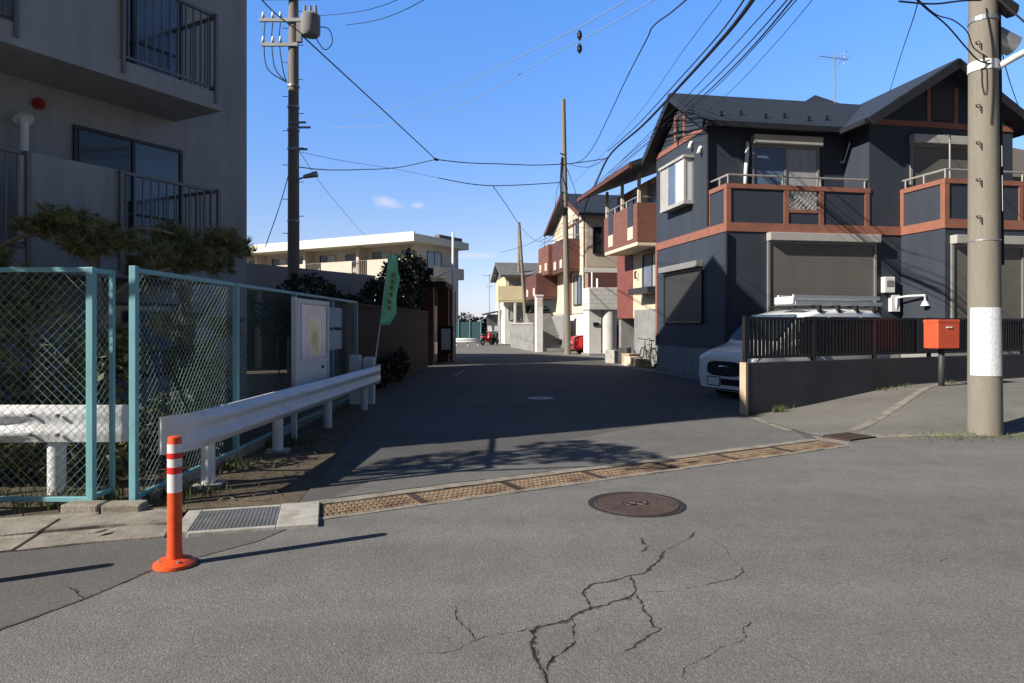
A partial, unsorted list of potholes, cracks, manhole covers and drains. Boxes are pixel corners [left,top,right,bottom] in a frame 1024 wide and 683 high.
crack [680,622,805,680]
manhole cover [588,492,687,518]
drain grate [189,506,280,531]
crack [418,532,745,683]
drain grate [823,432,876,442]
crack [1,570,148,628]
